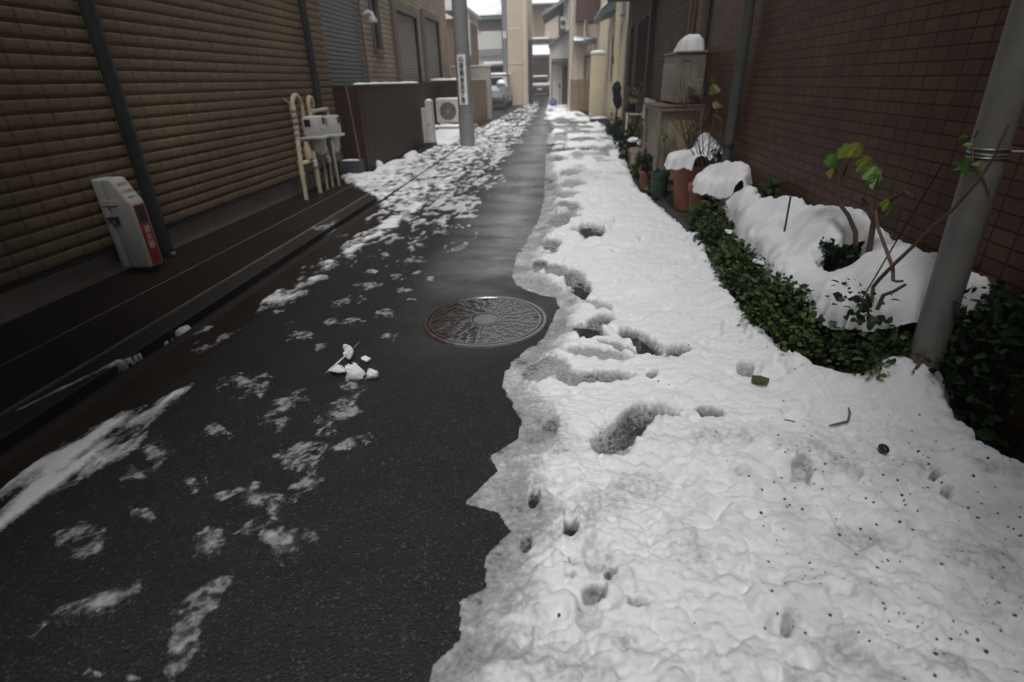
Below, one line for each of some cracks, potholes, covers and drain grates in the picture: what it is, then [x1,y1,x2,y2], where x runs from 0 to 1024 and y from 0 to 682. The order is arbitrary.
manhole cover [424,296,547,348]
